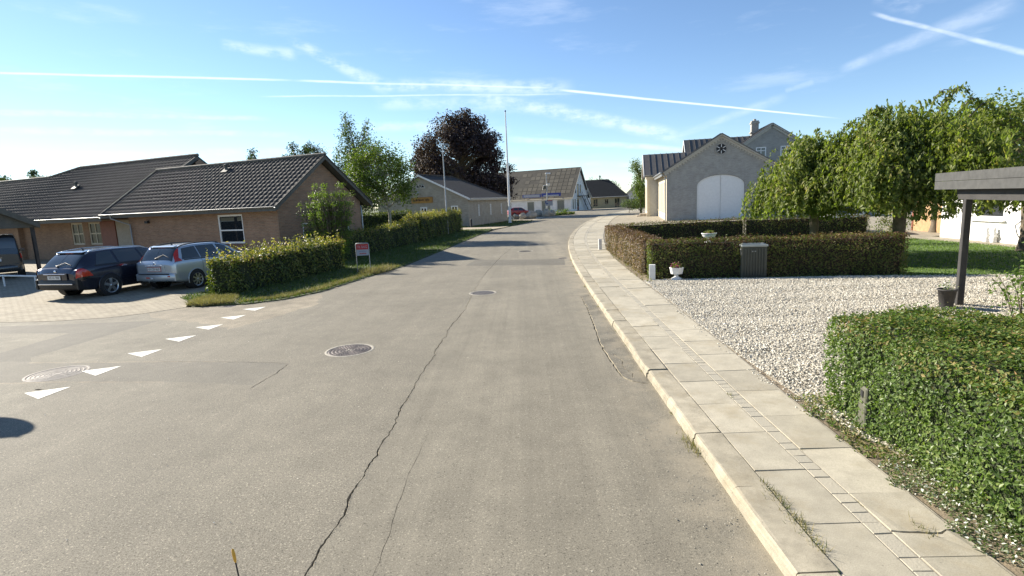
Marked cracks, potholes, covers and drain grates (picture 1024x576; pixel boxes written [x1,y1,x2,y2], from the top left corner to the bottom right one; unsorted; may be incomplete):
crack [581,297,648,384]
manhole cover [325,344,375,357]
crack [304,249,510,576]
manhole cover [22,365,91,382]
